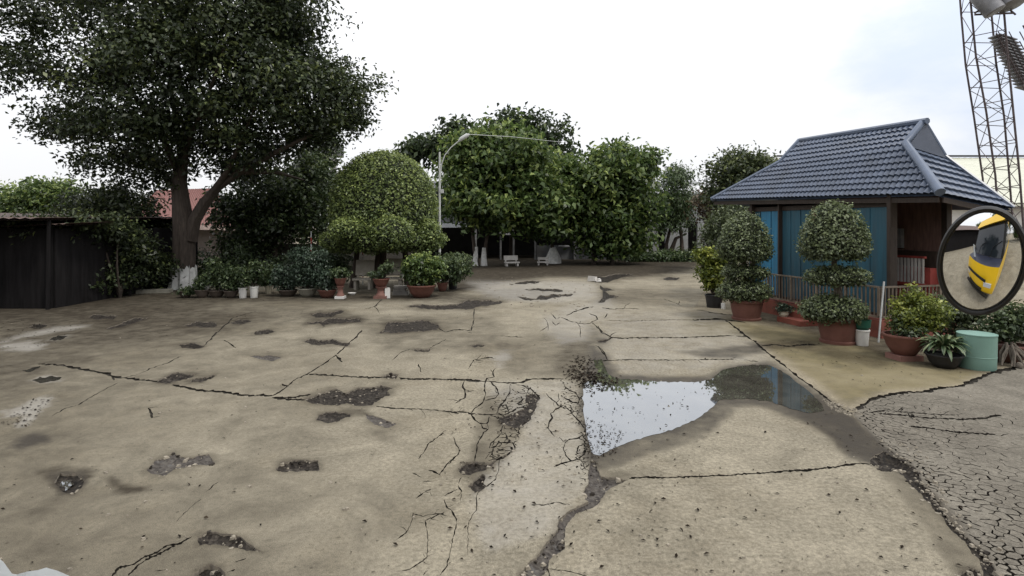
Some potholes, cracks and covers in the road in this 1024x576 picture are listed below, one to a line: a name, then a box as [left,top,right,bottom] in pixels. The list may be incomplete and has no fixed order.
pothole [306,385,393,406]
pothole [54,473,85,495]
pothole [379,320,439,333]
crack [112,482,246,576]
pothole [198,530,260,551]
crack [859,393,1024,576]
pothole [147,452,215,476]
pothole [275,460,319,472]
crack [396,354,590,575]
pothole [316,411,351,423]
